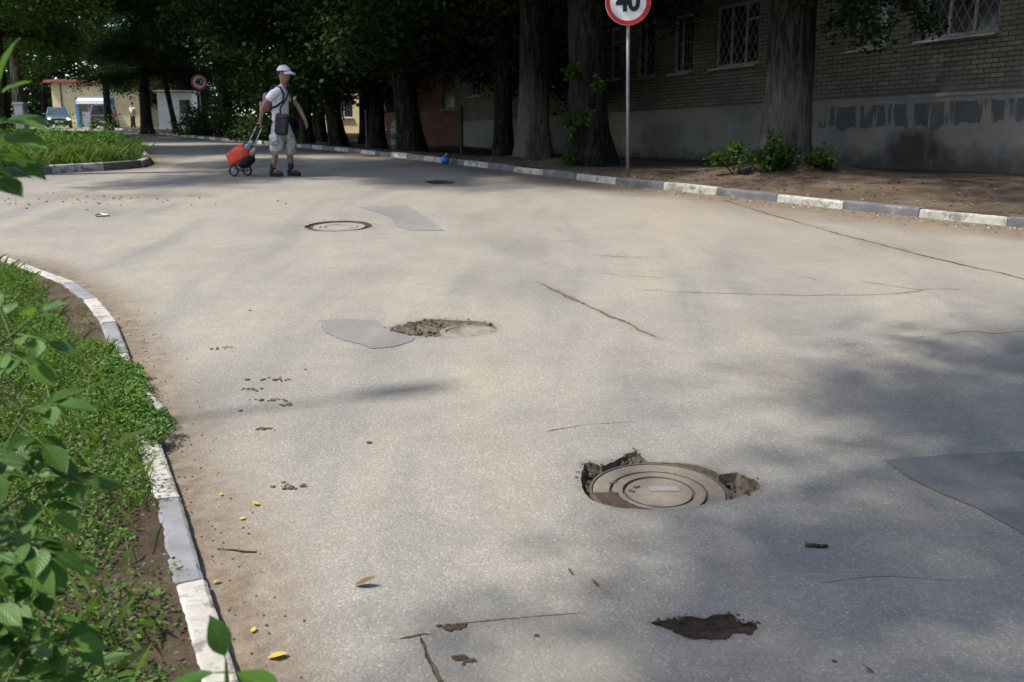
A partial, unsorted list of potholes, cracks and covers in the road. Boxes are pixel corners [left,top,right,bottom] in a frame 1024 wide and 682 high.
crack [820,576,961,584]
pothole [384,318,497,337]
pothole [650,611,761,641]
manhole cover [589,463,730,509]
manhole cover [305,221,372,231]
crack [725,200,1023,279]
crack [540,255,923,339]
crack [394,633,444,682]
